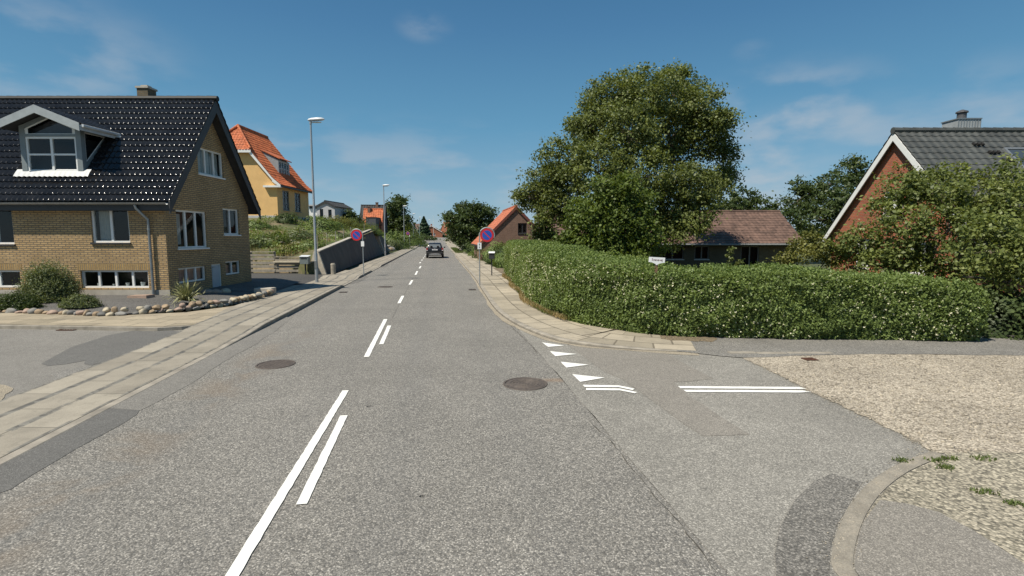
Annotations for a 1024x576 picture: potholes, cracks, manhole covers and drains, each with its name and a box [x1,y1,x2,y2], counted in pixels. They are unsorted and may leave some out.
manhole cover [503,377,548,391]
manhole cover [255,359,296,369]
